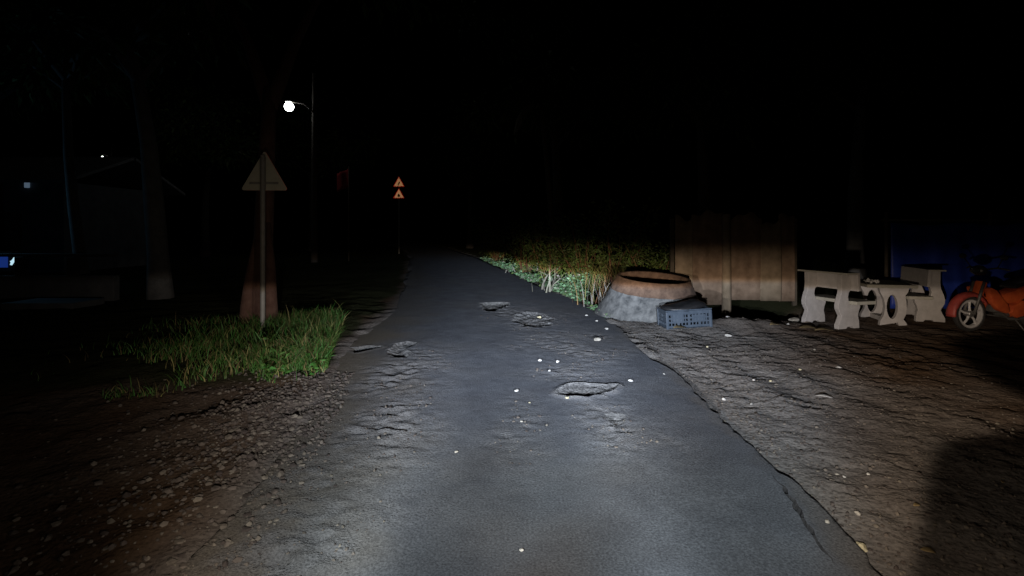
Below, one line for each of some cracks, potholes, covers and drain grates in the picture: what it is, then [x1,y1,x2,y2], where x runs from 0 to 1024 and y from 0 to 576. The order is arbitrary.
pothole [509,311,555,328]
crack [773,476,834,563]
pothole [479,302,510,311]
pothole [351,345,384,353]
pothole [385,341,417,358]
pothole [554,382,619,397]
